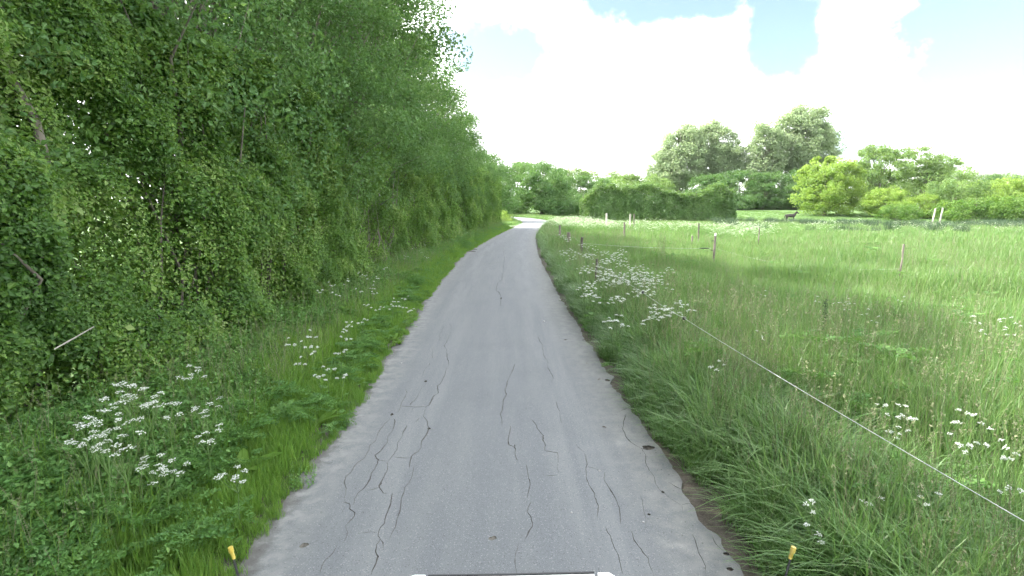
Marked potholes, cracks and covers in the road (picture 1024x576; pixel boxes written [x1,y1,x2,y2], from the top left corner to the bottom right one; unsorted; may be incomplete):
crack [500,364,533,573]
crack [575,408,689,573]
crack [320,325,451,574]
